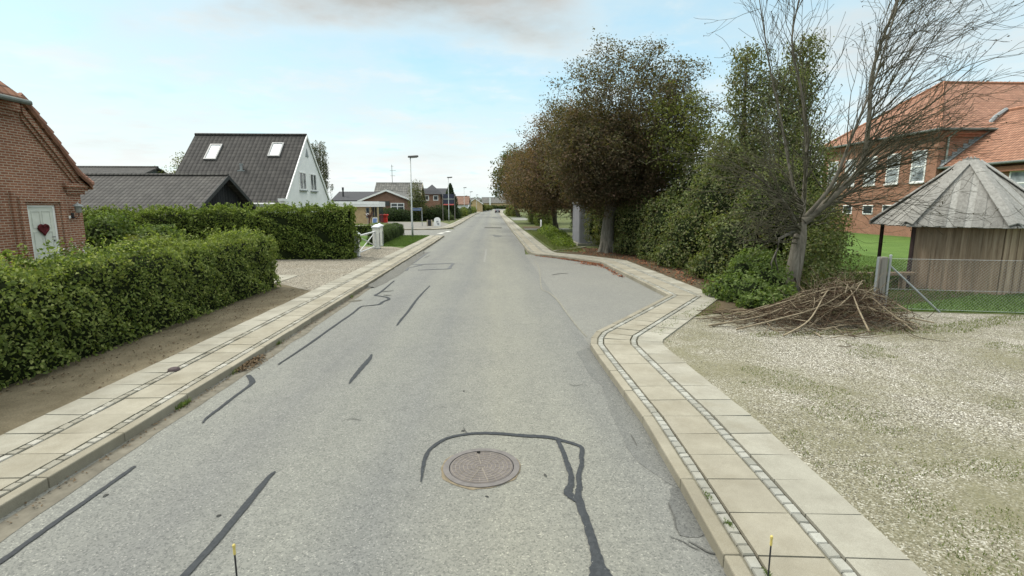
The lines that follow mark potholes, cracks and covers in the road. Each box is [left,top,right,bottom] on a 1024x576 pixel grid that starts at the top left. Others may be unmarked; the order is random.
manhole cover [441,448,521,490]
